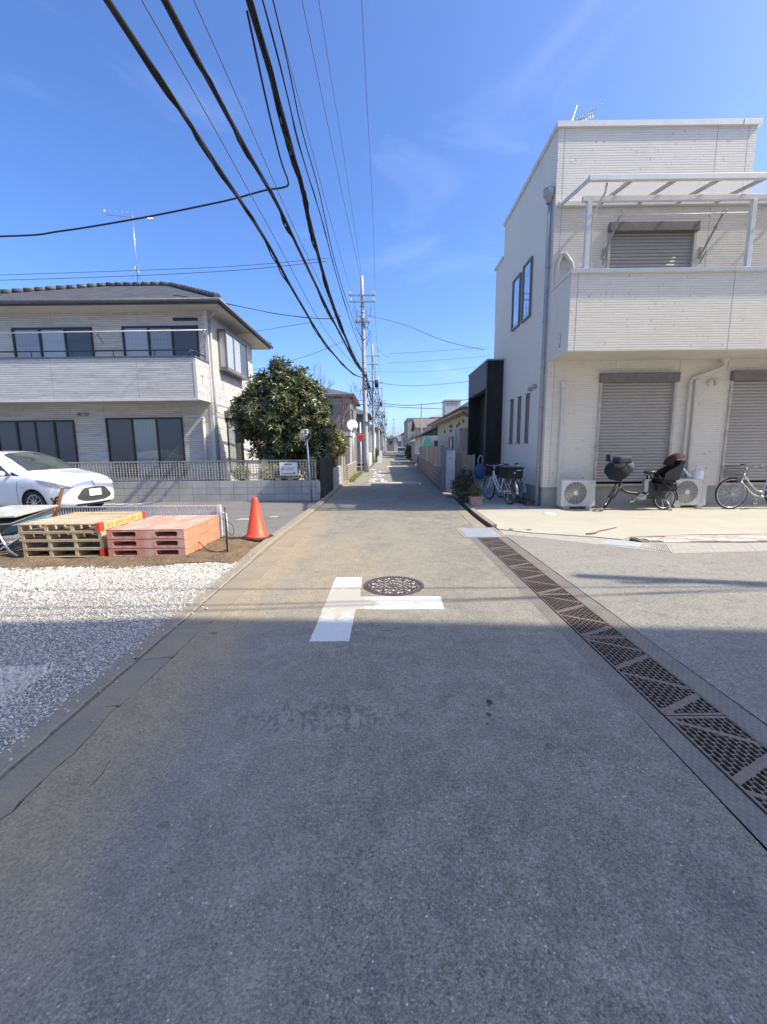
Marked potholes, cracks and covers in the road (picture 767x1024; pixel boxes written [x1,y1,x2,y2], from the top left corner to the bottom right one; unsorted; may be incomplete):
drain grate [538,594,625,639]
drain grate [490,548,536,568]
drain grate [583,637,725,717]
drain grate [478,537,512,549]
manhole cover [363,576,424,596]
drain grate [509,567,570,595]
drain grate [665,715,767,815]
